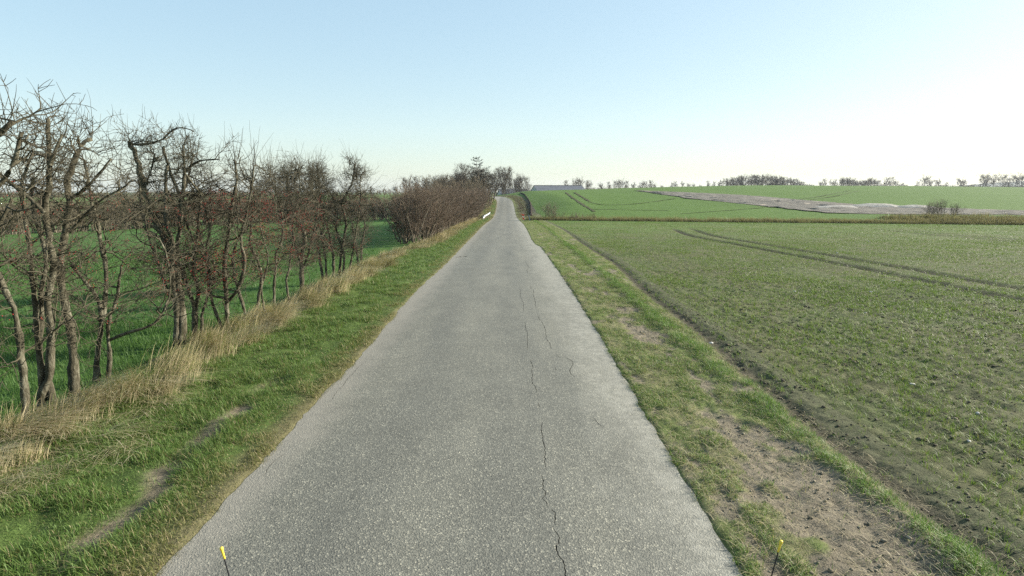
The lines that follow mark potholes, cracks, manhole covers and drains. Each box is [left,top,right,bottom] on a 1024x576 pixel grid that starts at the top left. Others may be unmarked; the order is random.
crack [520,290,573,576]
